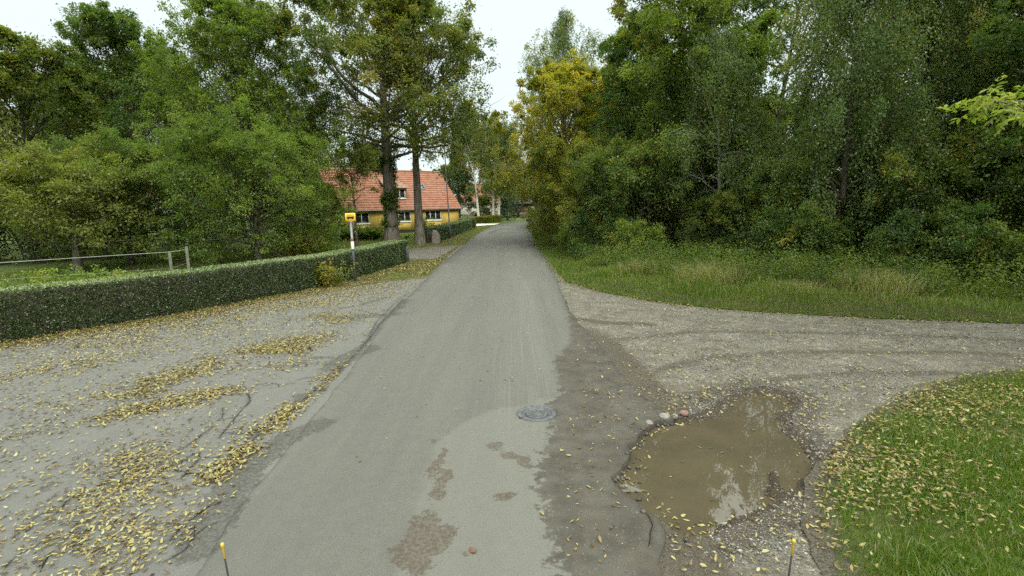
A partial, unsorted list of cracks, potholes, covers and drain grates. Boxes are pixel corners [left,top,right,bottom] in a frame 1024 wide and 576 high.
pothole [622,386,826,536]
crack [641,508,653,547]
manhole cover [517,405,557,422]
crack [167,504,216,560]
